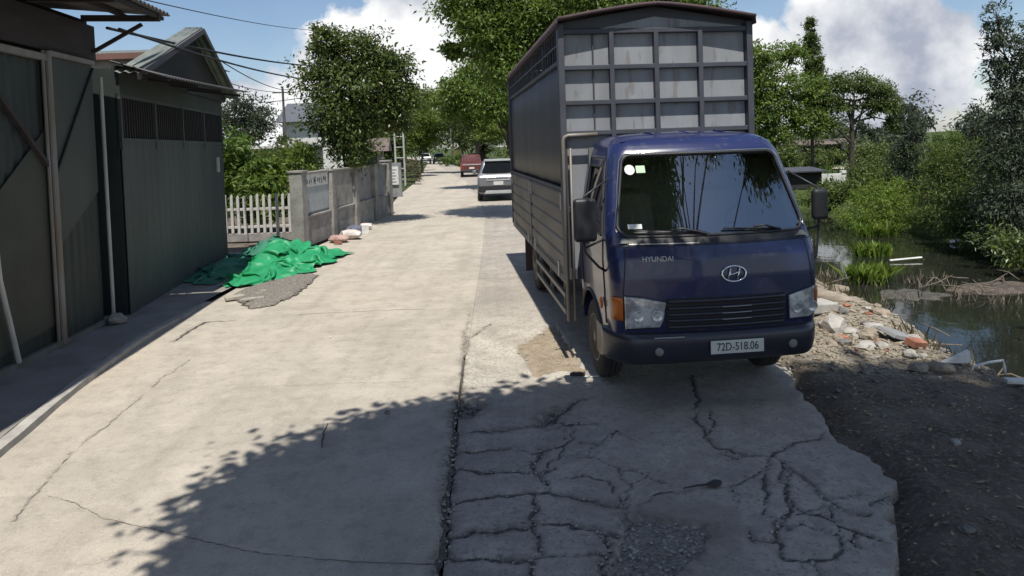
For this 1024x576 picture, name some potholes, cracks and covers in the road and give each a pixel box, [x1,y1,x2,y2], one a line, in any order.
crack [14,359,191,521]
pothole [610,519,707,576]
crack [447,375,889,576]
